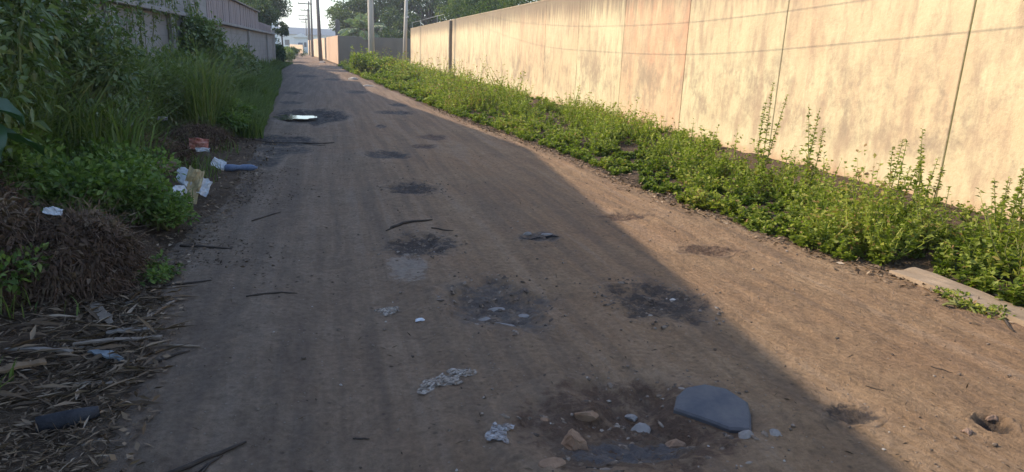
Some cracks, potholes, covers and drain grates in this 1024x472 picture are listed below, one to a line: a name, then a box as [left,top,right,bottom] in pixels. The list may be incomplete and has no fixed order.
pothole [591,275,725,331]
pothole [372,230,467,260]
pothole [356,148,415,161]
pothole [481,367,780,472]
pothole [377,179,444,197]
pothole [965,412,1023,435]
pothole [427,271,566,339]
